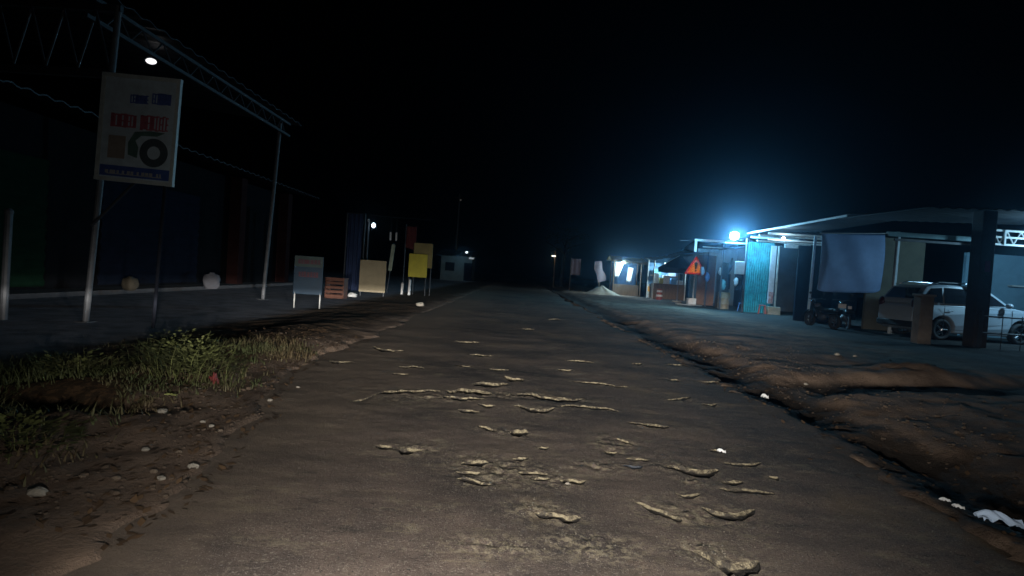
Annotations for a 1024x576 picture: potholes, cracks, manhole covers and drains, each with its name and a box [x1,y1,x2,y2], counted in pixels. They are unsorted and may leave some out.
pothole [693,550,761,576]
pothole [535,511,581,524]
pothole [461,459,489,467]
pothole [664,465,719,478]
pothole [635,502,682,522]
pothole [350,390,441,402]
pothole [701,507,756,522]
pothole [507,393,587,402]
